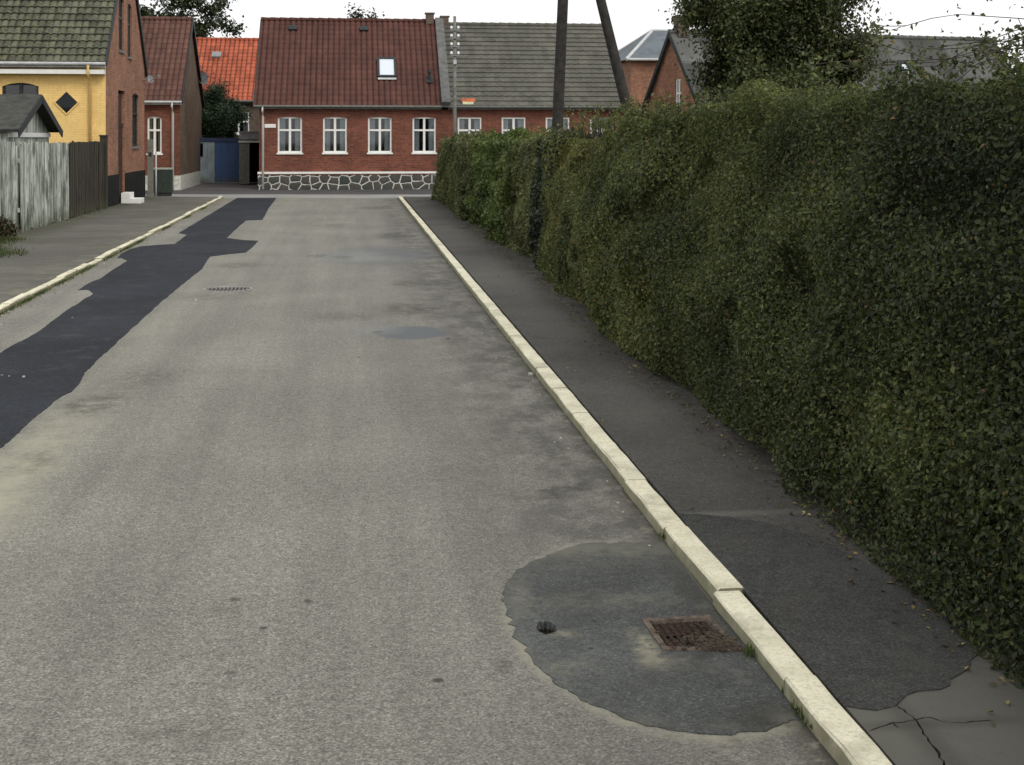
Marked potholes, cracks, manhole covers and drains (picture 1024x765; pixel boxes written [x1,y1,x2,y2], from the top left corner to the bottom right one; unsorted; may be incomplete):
crack [870,706,993,765]
pothole [534,619,560,636]
drain grate [641,614,743,653]
